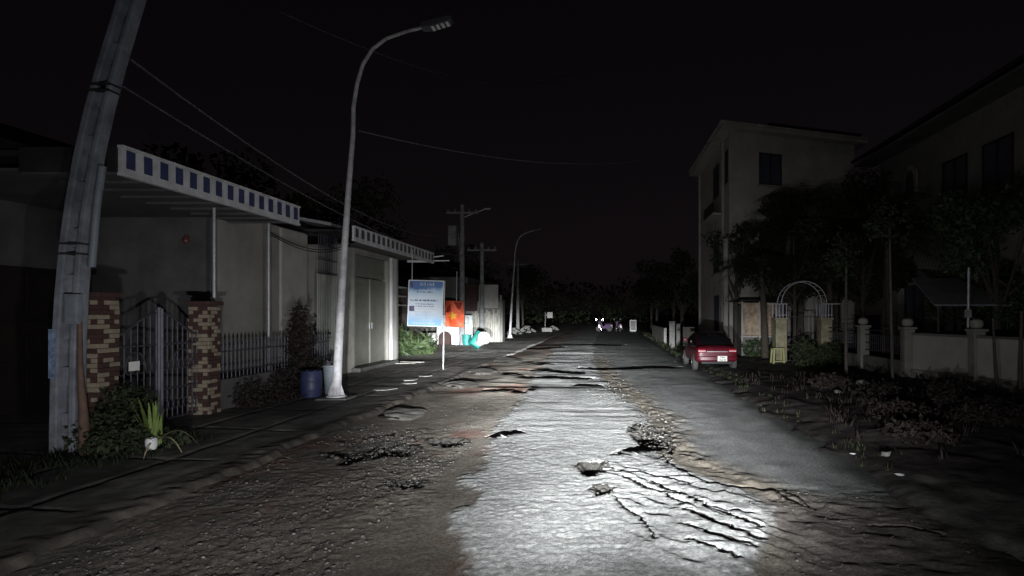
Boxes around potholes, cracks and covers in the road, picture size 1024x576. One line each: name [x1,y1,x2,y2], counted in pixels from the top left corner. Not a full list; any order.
pothole [570,460,618,478]
crack [601,446,815,558]
pothole [588,484,616,497]
pothole [319,436,425,467]
pothole [424,437,472,448]
crack [482,347,682,395]
pothole [626,423,677,455]
